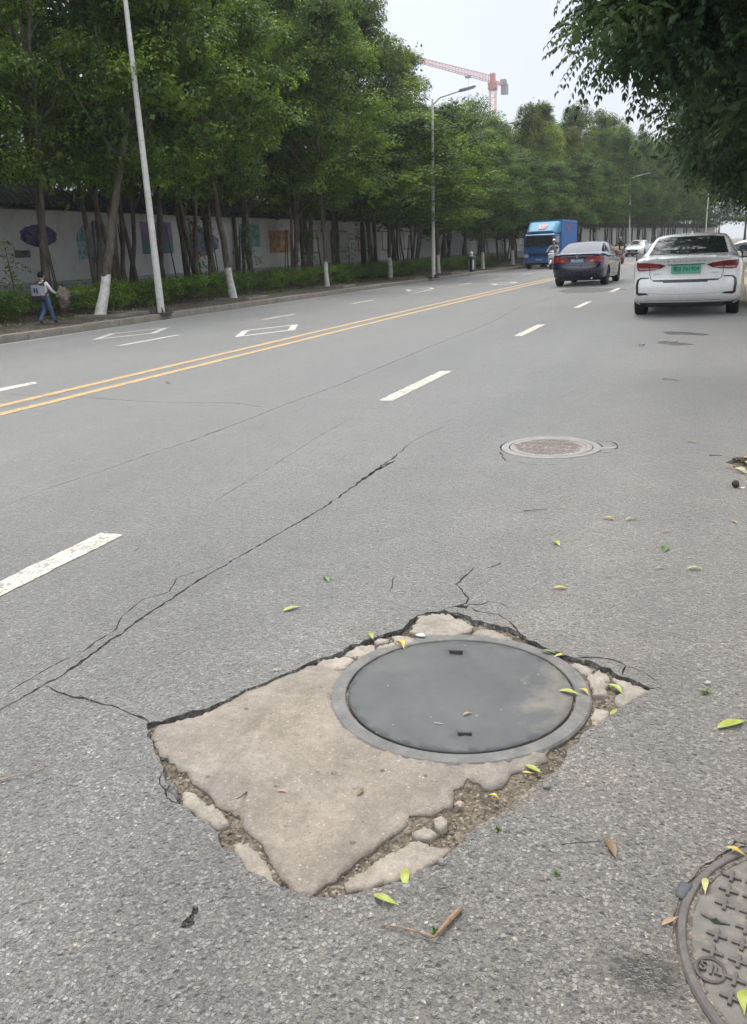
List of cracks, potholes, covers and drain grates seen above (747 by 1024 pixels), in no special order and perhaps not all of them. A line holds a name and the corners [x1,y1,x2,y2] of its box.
crack [0,428,440,725]
pothole [180,906,199,929]
manhole cover [330,635,592,766]
crack [402,563,539,648]
manhole cover [675,847,747,1024]
manhole cover [501,436,616,459]
